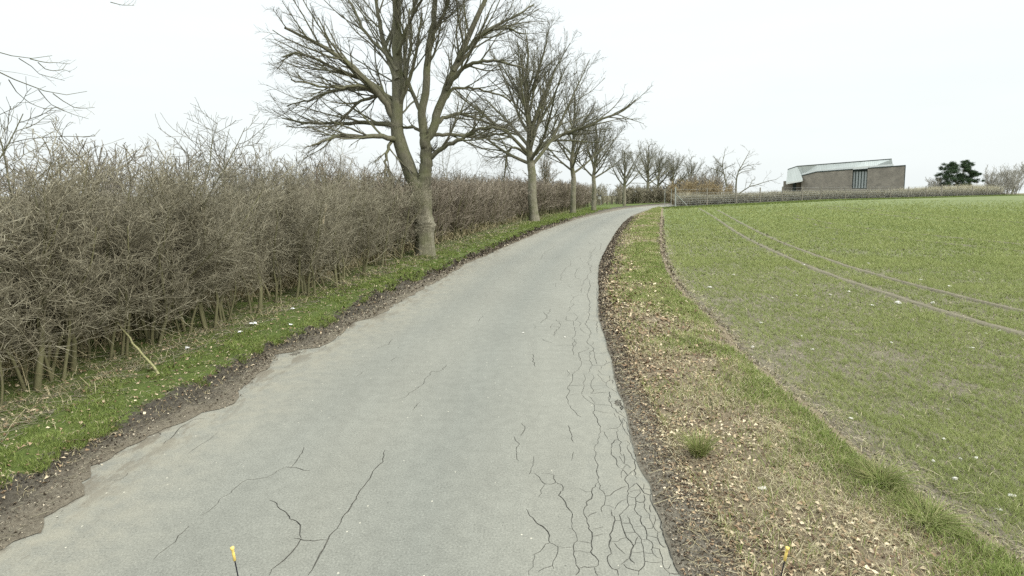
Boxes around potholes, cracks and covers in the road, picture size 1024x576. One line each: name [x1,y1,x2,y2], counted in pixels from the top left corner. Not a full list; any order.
crack [269,451,385,575]
crack [202,448,310,515]
